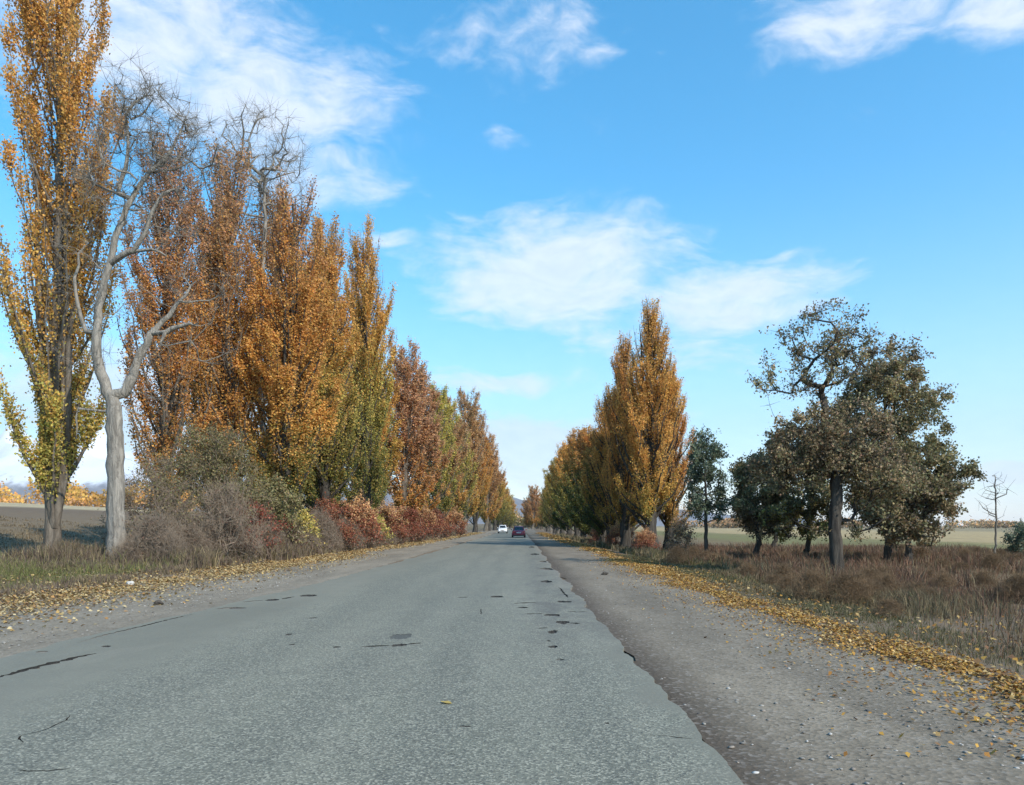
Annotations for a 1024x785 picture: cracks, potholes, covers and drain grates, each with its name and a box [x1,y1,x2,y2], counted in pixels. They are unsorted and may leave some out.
crack [0,616,183,677]
